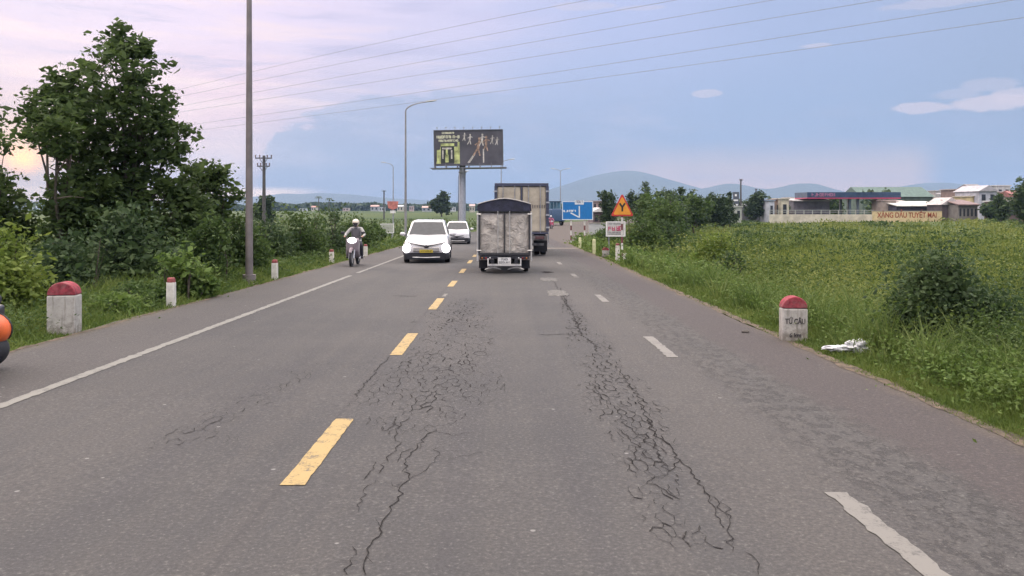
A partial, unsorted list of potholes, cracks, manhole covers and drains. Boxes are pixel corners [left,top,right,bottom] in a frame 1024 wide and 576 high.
crack [143,370,311,448]
crack [339,302,505,574]
crack [541,281,760,574]
